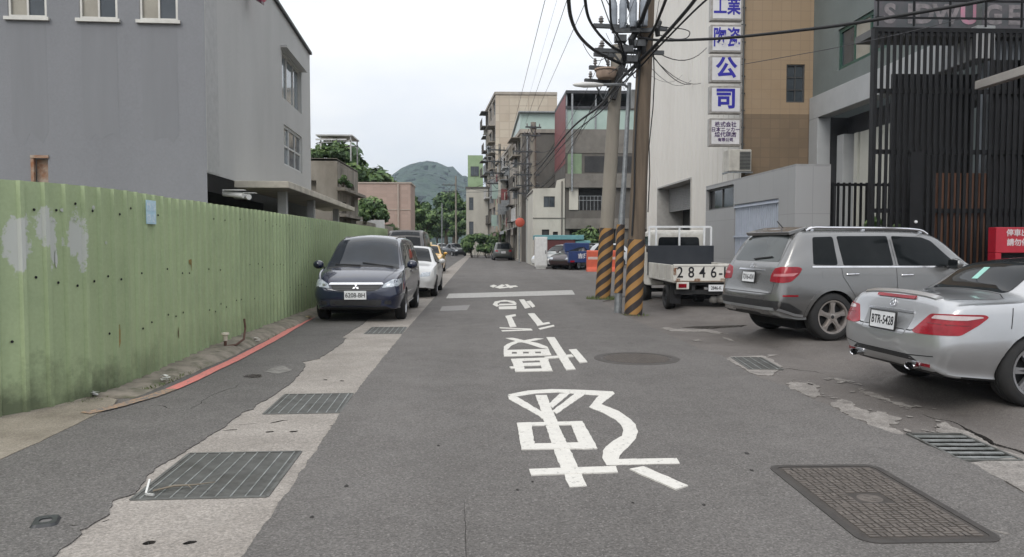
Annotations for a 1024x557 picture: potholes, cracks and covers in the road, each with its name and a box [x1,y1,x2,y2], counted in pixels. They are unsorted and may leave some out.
utility cover [29,514,61,529]
drain grate [906,433,1024,462]
drain grate [731,357,784,370]
drain grate [129,450,302,501]
manhole cover [594,352,680,365]
drain grate [262,393,354,415]
manhole cover [770,464,1000,544]
